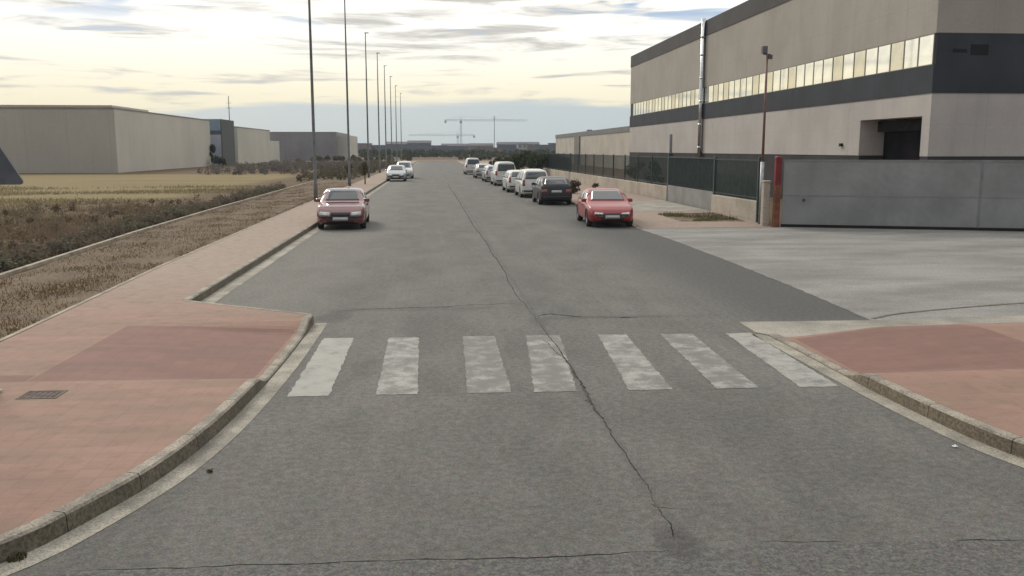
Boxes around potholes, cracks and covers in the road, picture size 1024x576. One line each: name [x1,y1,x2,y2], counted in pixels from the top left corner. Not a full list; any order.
utility cover [16,390,68,399]
crack [86,185,674,571]
